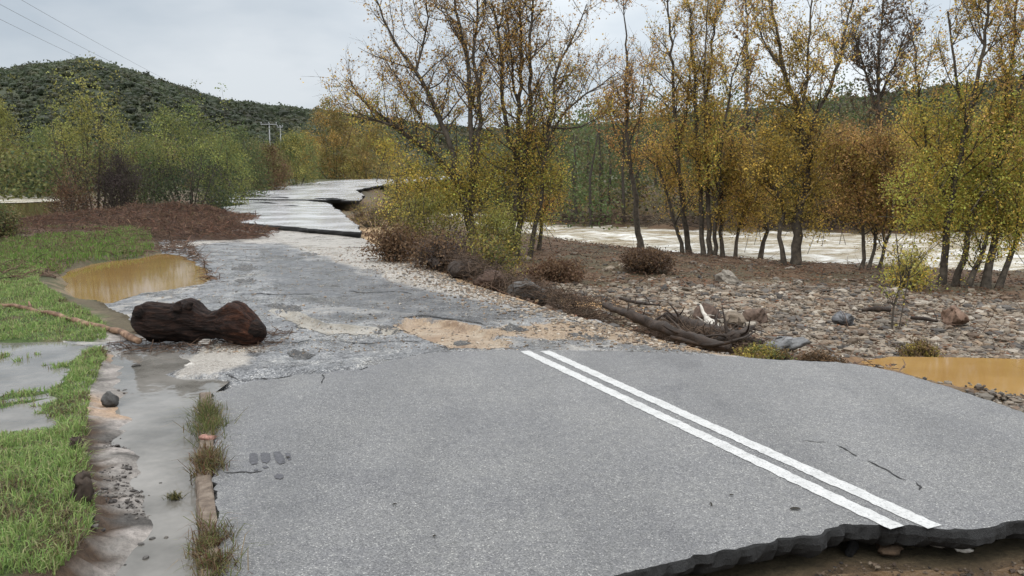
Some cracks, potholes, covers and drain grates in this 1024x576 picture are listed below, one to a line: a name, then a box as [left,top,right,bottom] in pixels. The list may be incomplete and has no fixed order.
pothole [502,323,529,332]
pothole [269,307,403,336]
crack [838,445,922,490]
pothole [391,317,513,349]
